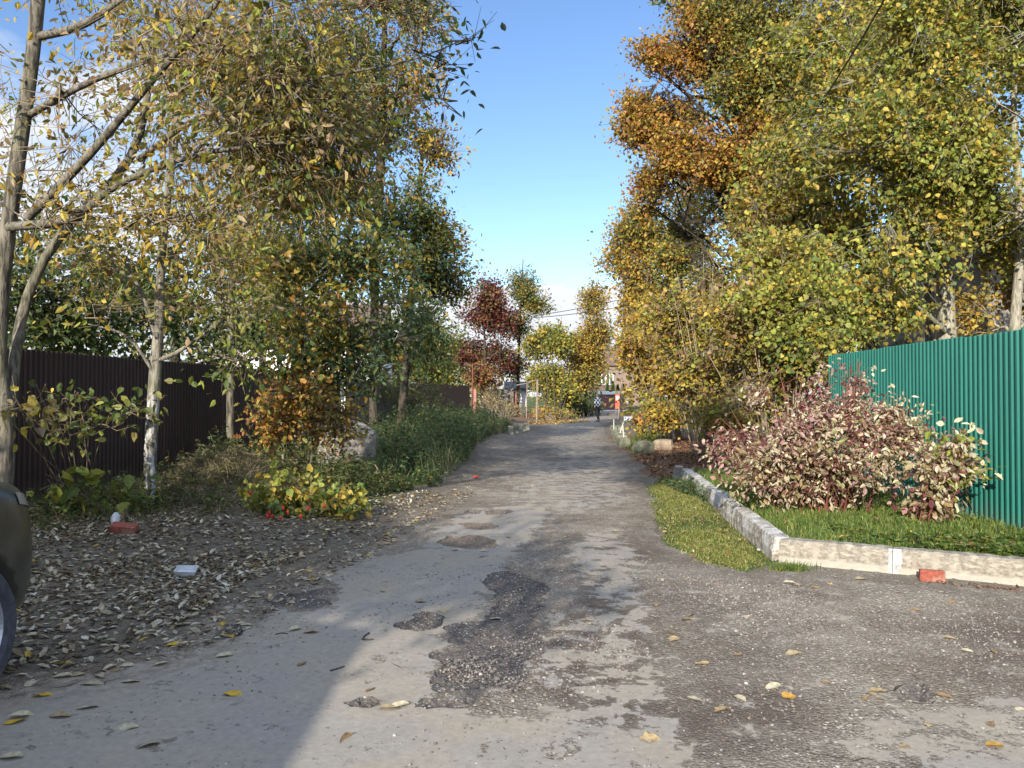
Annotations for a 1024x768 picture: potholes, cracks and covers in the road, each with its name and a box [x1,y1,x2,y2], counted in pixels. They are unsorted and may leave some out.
pothole [436,534,500,549]
pothole [459,522,499,530]
pothole [428,571,551,693]
pothole [393,611,445,632]
pothole [343,696,383,708]
pothole [893,682,935,702]
pothole [414,696,480,709]
